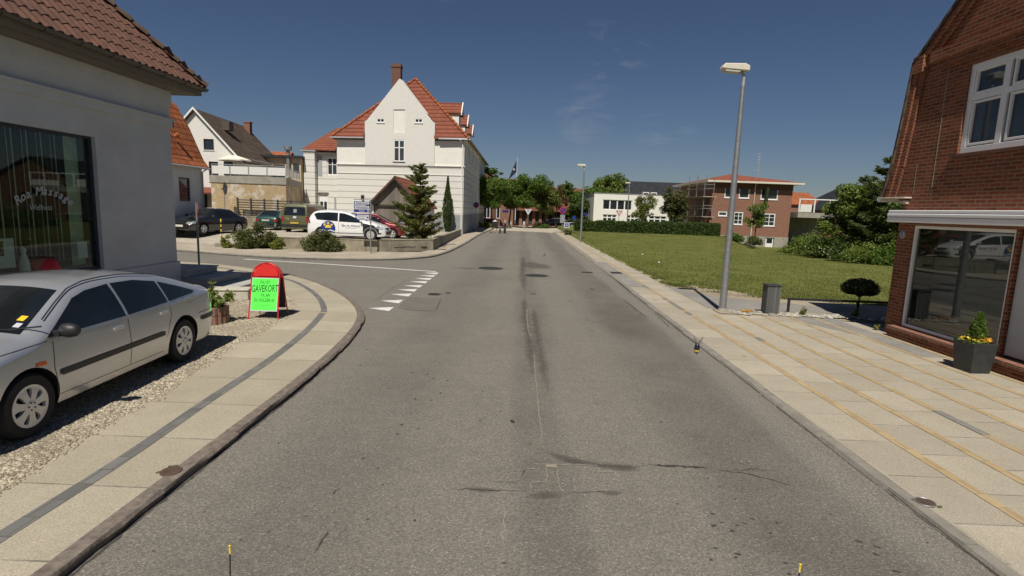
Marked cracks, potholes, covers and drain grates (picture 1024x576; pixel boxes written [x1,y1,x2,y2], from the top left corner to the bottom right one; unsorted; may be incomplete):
crack [651,464,789,485]
utility cover [914,497,937,507]
crack [463,464,612,543]
utility cover [159,466,183,476]
